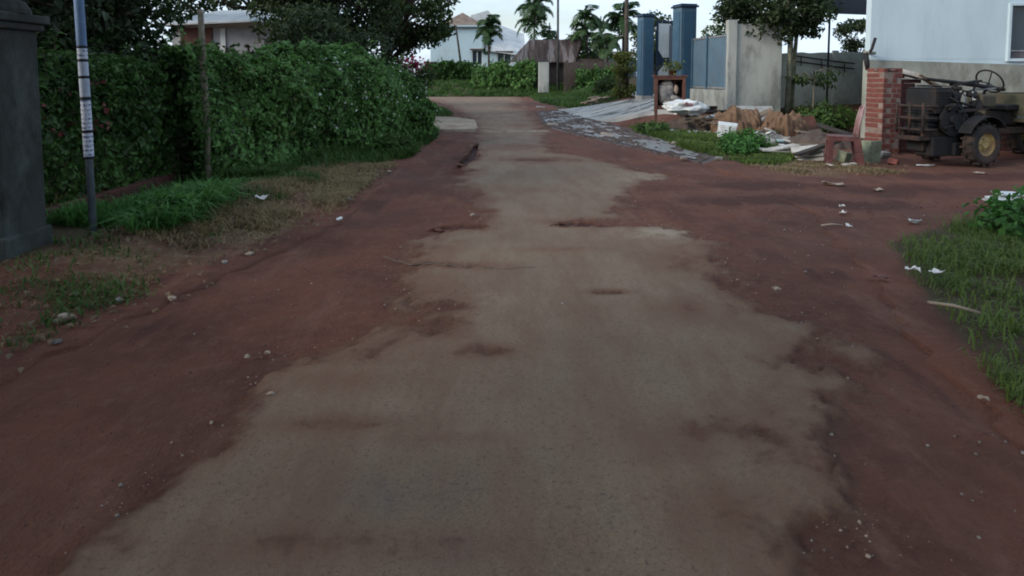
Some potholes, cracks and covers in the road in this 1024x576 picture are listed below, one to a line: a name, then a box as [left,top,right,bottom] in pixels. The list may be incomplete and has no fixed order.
pothole [428,224,490,232]
crack [383,255,535,270]
pothole [456,144,480,168]
